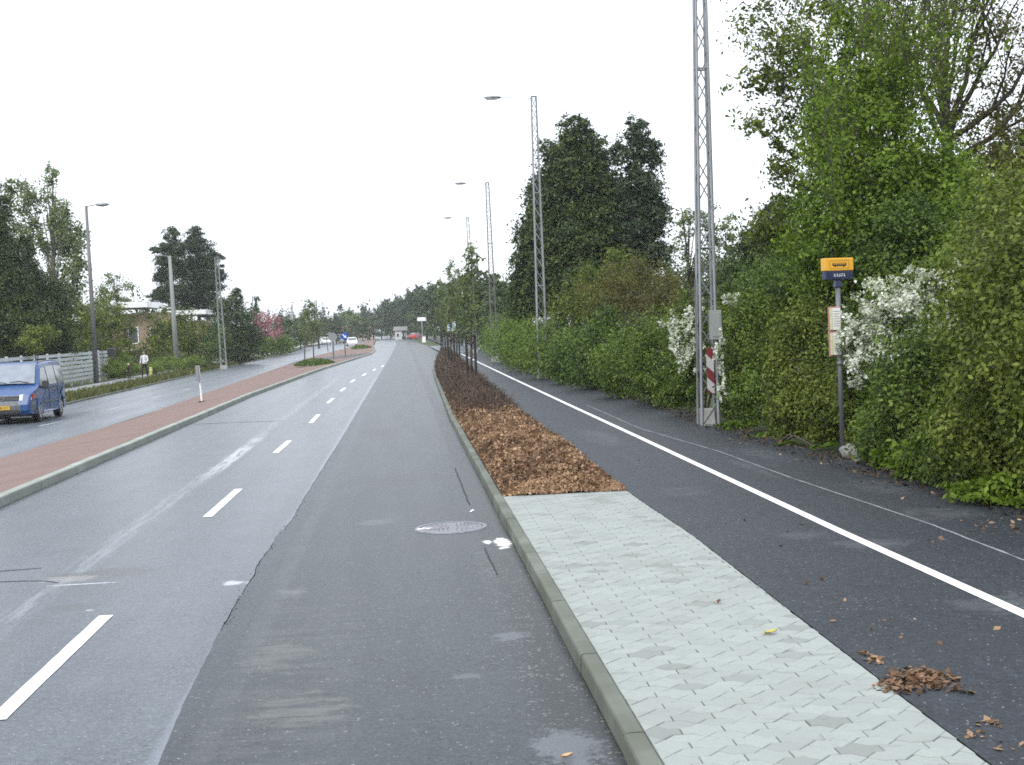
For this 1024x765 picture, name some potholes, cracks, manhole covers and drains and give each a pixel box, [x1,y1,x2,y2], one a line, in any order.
manhole cover [415,521,488,534]
